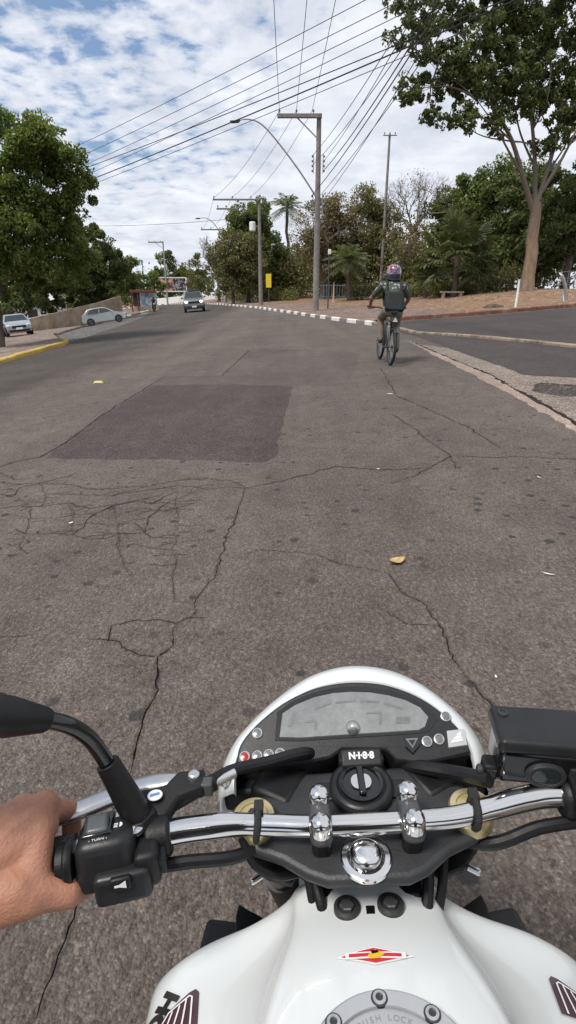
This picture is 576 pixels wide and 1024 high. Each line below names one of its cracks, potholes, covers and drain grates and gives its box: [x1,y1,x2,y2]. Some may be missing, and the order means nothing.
crack [252,549,493,707]
crack [0,472,254,1019]
crack [248,396,562,488]
